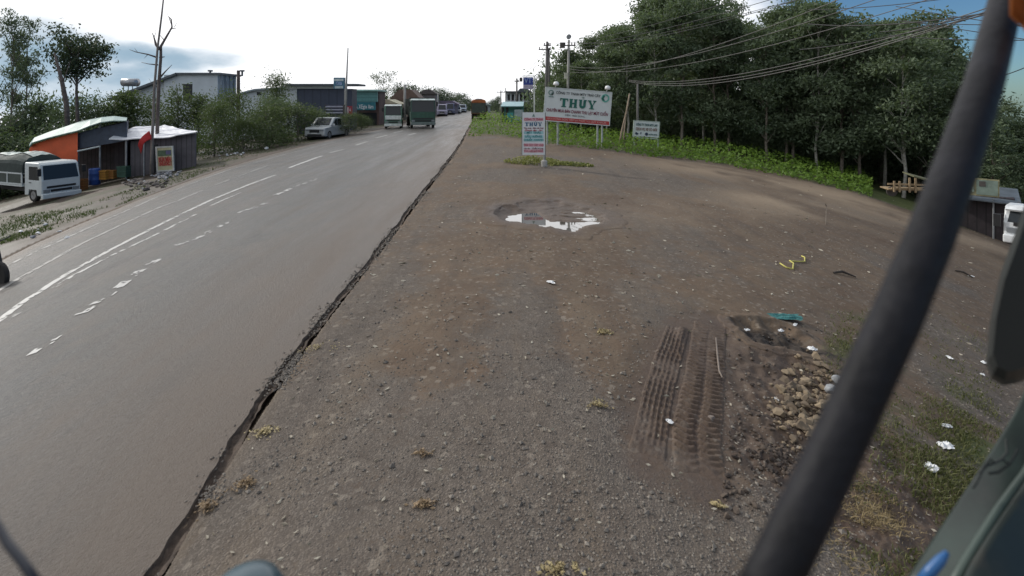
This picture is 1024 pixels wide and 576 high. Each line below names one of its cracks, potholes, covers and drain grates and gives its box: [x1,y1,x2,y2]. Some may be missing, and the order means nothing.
crack [147,130,468,576]
pothole [717,312,842,366]
pothole [467,195,628,241]
